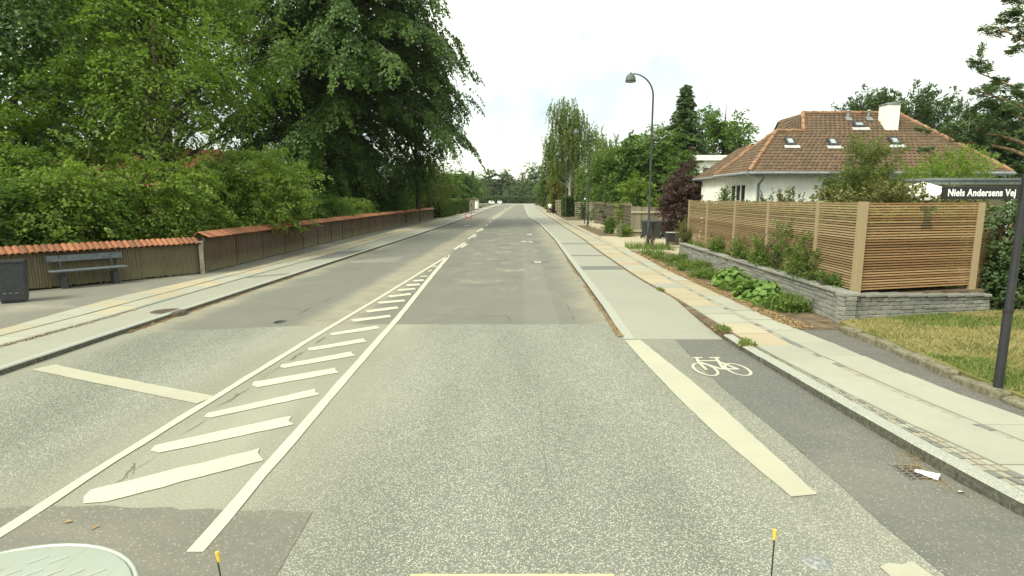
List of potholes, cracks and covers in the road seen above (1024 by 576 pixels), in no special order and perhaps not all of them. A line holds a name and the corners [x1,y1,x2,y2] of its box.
crack [184,336,326,433]
manhole cover [0,542,139,576]
drain grate [889,464,937,481]
